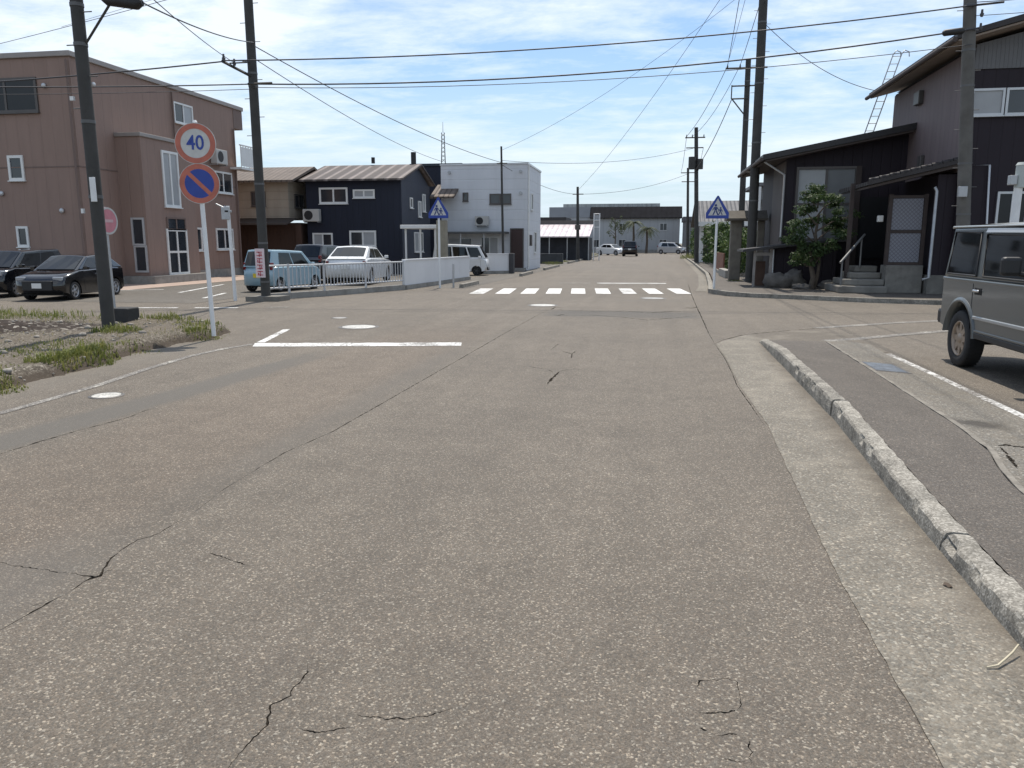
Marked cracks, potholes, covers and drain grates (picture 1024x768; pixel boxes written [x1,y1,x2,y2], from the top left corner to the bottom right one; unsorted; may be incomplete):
crack [697,678,753,764]
manhole cover [861,361,912,374]
crack [228,665,449,768]
